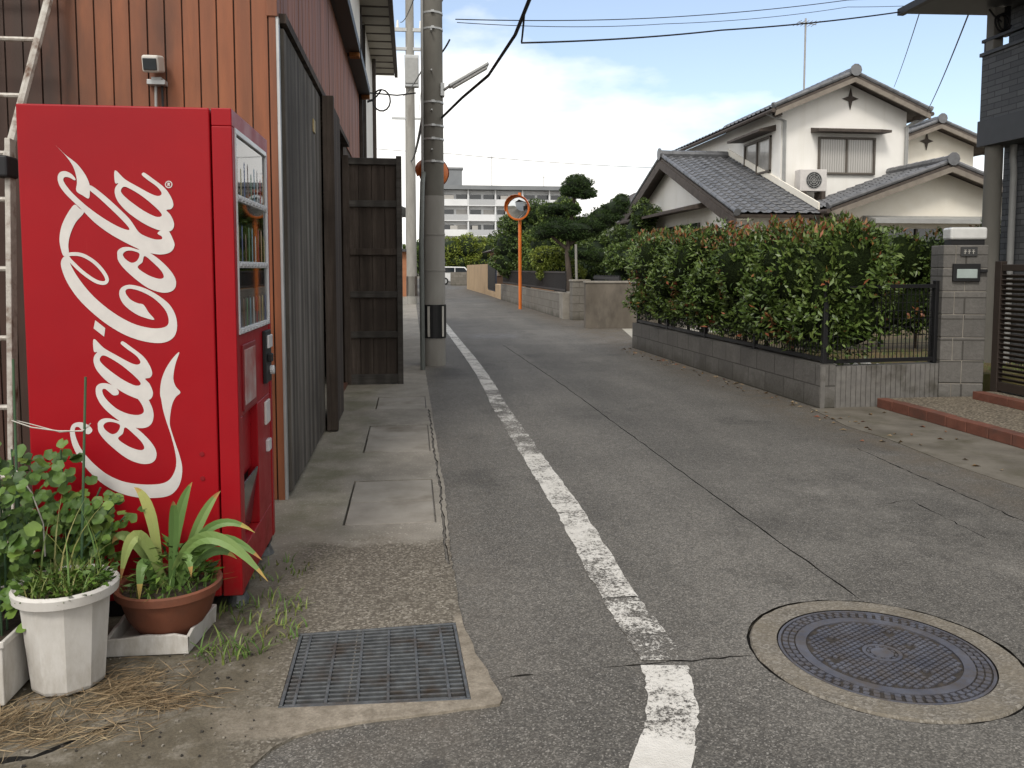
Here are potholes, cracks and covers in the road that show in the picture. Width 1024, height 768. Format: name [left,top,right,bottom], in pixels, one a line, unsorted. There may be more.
crack [859,449,1023,521]
drain grate [278,623,471,708]
crack [428,411,450,565]
crack [612,655,751,667]
manhole cover [746,601,1024,725]
